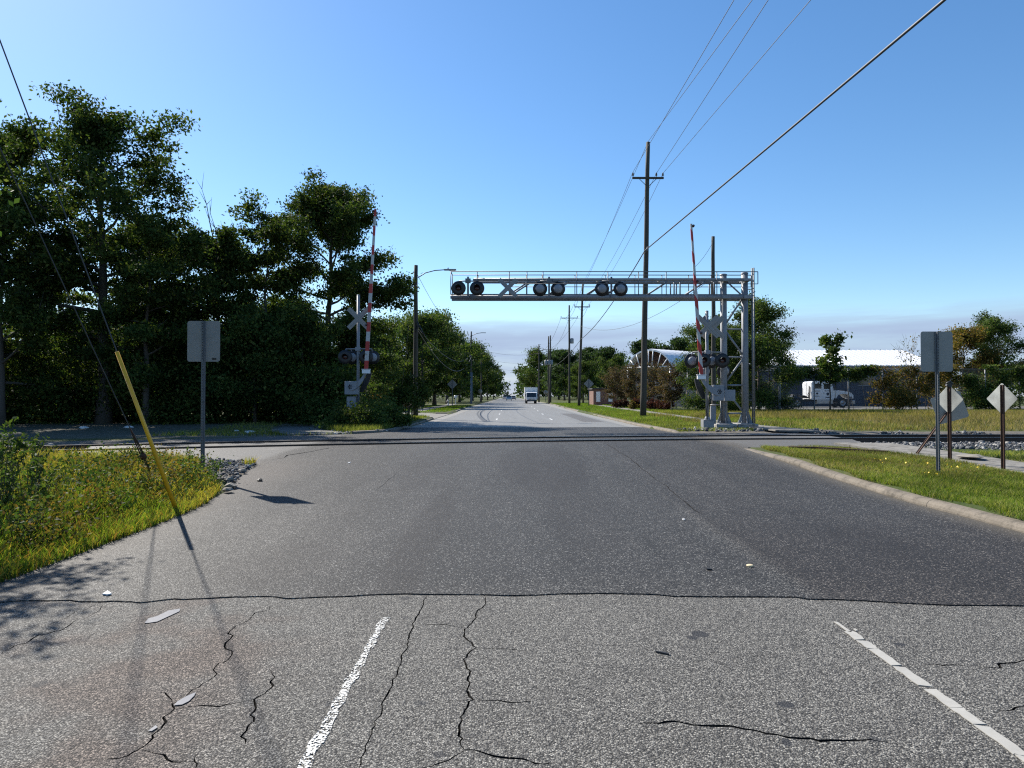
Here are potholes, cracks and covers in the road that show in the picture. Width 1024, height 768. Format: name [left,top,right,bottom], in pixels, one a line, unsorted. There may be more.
crack [1,604,102,654]
crack [359,595,551,768]
crack [924,660,1024,668]
crack [622,719,884,742]
crack [108,601,292,768]
